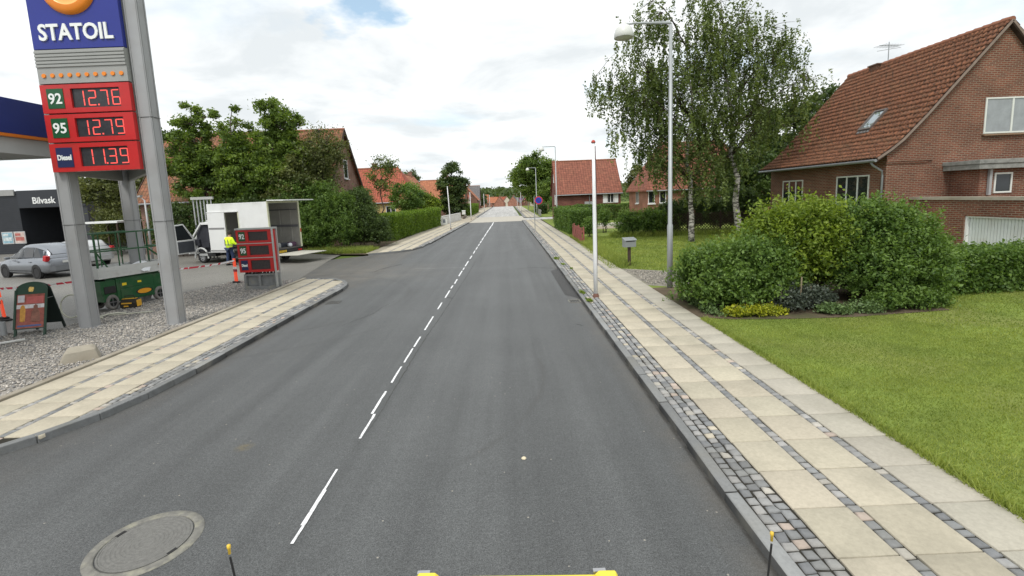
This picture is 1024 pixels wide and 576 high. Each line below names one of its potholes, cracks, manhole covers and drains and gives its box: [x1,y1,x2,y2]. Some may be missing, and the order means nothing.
manhole cover [80,510,205,576]
